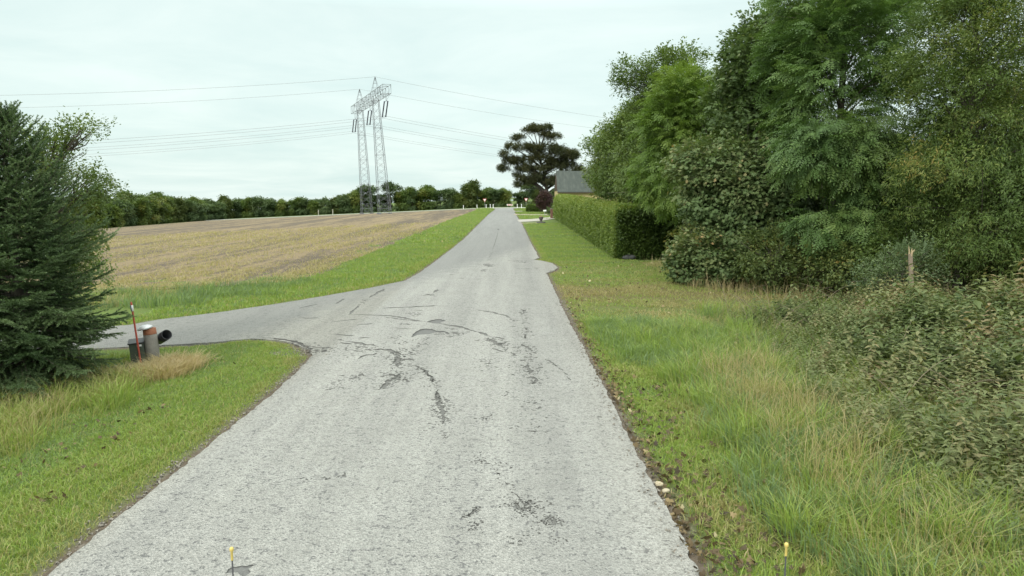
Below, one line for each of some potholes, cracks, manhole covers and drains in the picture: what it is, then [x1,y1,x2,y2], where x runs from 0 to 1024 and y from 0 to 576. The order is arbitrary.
pothole [411,329,449,337]
crack [273,274,571,439]
